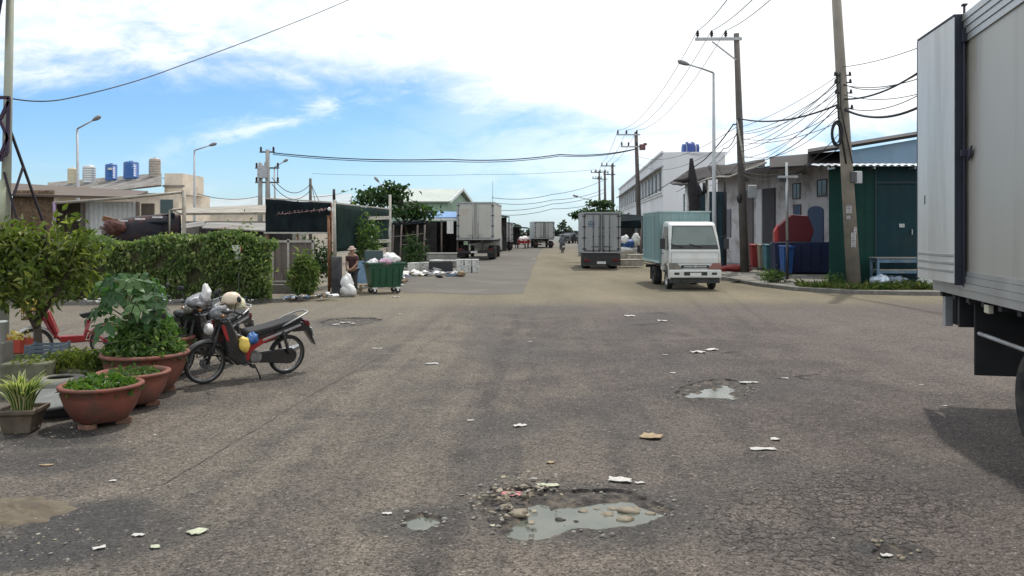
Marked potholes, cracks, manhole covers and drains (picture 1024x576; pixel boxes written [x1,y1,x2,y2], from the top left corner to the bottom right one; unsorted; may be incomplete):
pothole [395,510,448,534]
pothole [871,539,922,561]
pothole [662,377,759,402]
pothole [468,480,708,550]
